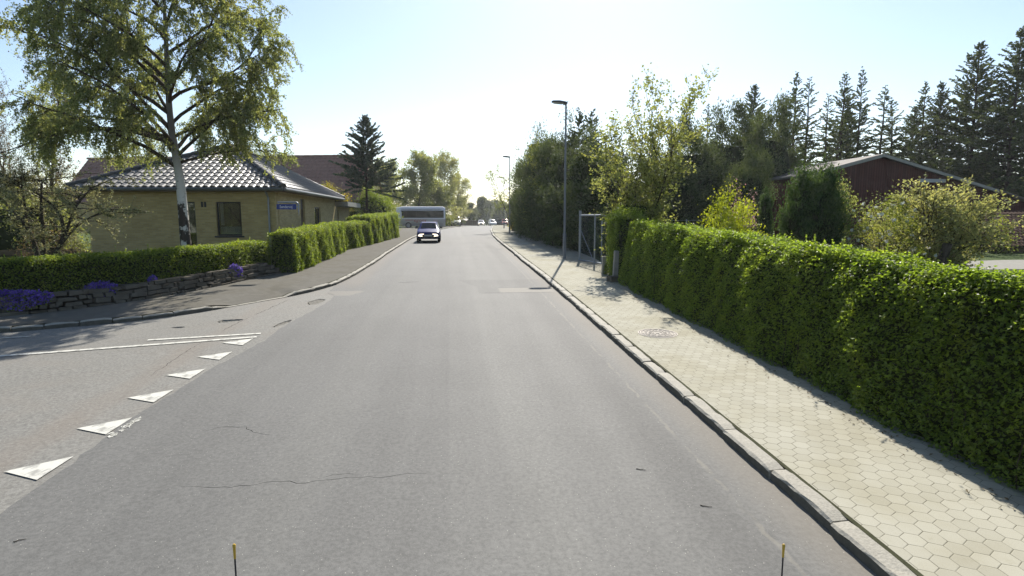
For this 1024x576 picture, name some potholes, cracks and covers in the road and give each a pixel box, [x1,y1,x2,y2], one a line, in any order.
crack [184,473,426,488]
manhole cover [638,329,678,338]
